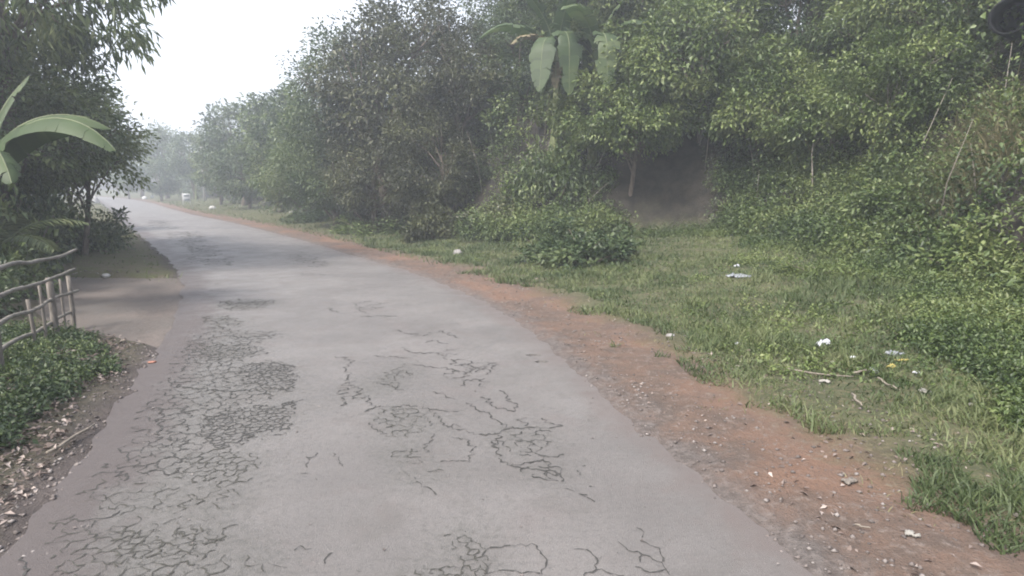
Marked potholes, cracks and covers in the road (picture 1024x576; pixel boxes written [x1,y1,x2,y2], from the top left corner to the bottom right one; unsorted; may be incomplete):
crack [329,301,595,502]
crack [577,527,670,576]
crack [18,510,333,576]
